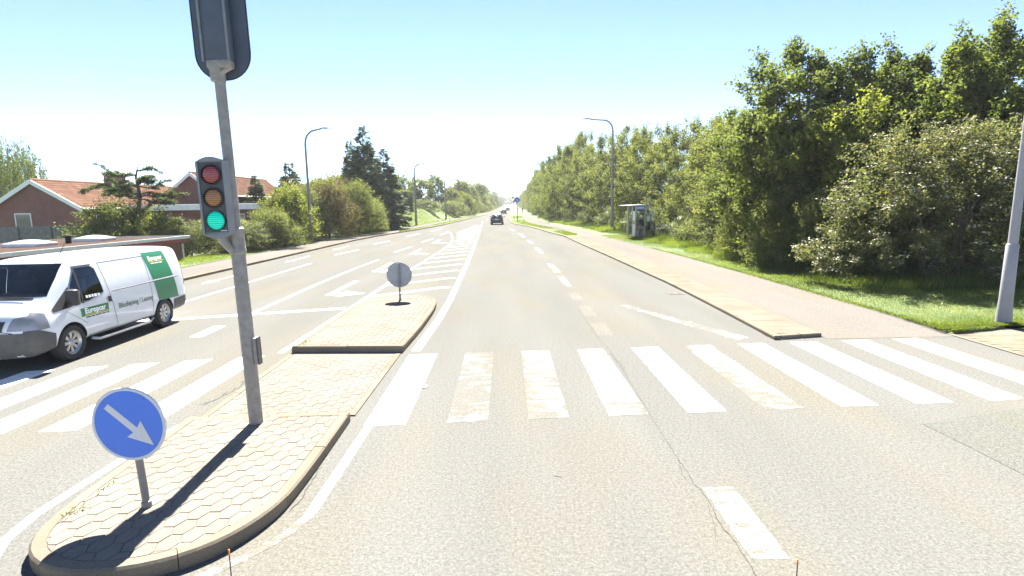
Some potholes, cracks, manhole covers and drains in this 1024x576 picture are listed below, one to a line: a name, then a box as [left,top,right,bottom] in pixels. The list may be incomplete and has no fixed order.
crack [552,270,757,576]
